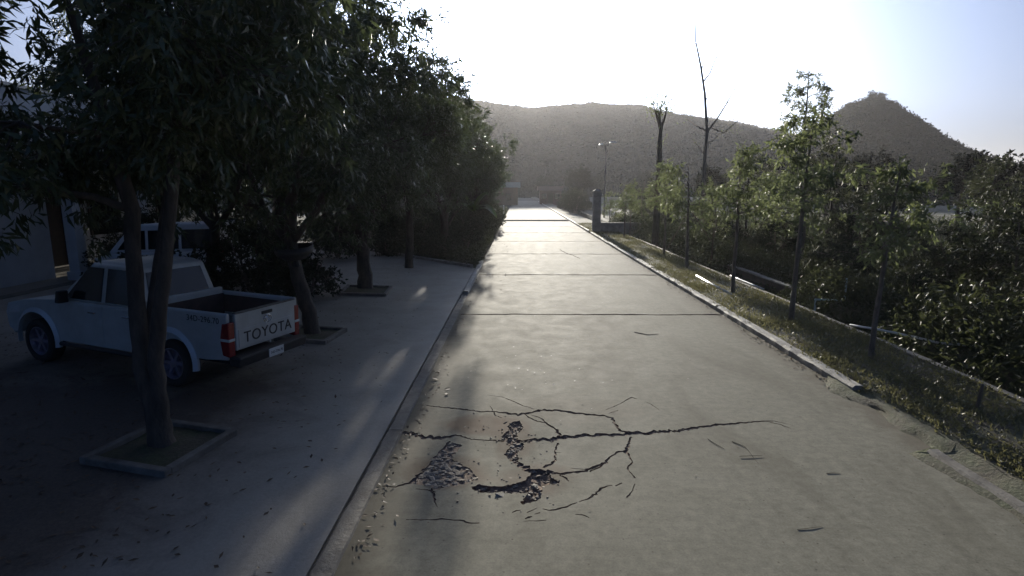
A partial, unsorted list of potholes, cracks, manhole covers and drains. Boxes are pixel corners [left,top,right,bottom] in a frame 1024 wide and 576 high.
pothole [412,442,478,490]
crack [385,395,790,524]
pothole [501,420,524,463]
pothole [472,469,559,505]
